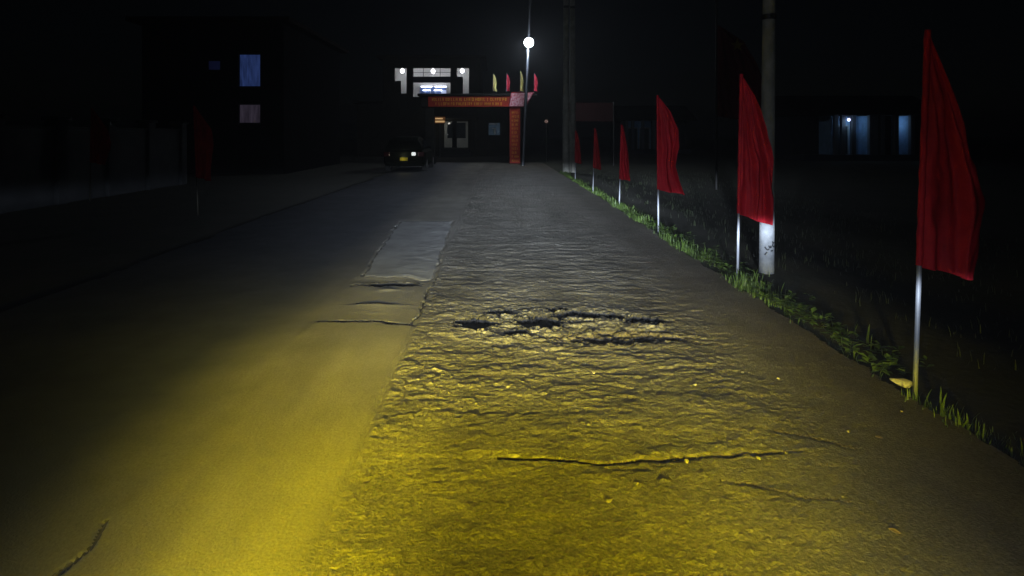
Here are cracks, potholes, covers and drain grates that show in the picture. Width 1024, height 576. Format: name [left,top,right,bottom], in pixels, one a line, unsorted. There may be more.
crack [52,520,109,576]
pothole [510,313,571,329]
pothole [552,309,604,319]
crack [318,277,437,326]
pothole [623,314,670,326]
pothole [544,330,710,347]
pothole [451,315,505,330]
crack [497,429,858,503]
